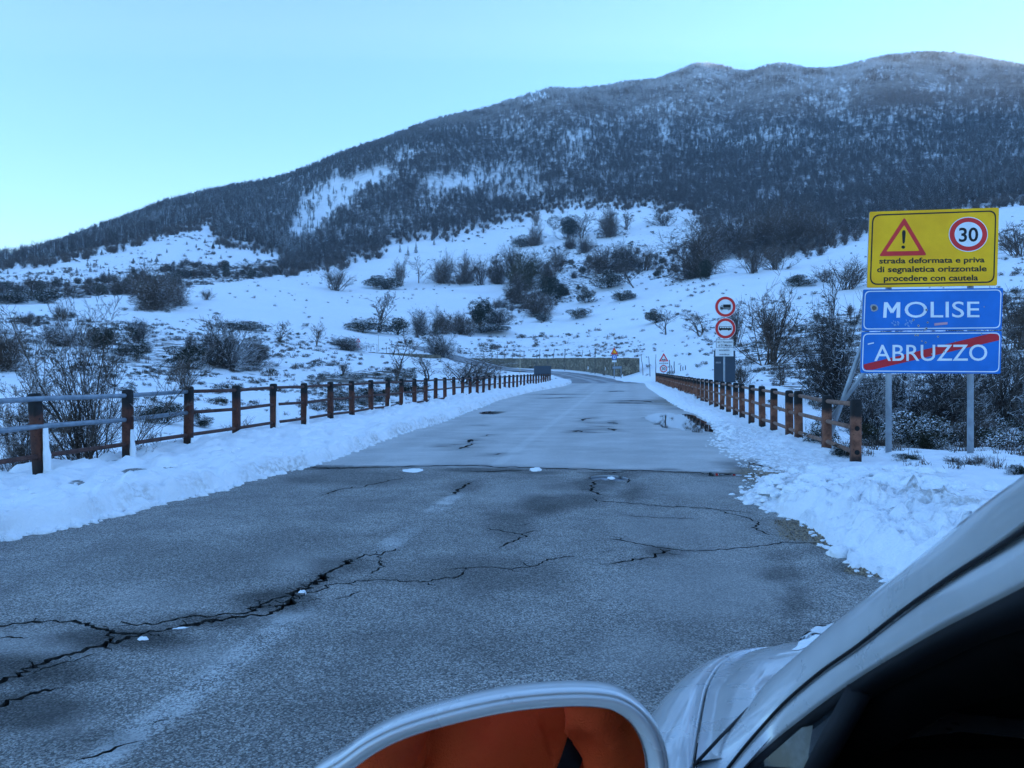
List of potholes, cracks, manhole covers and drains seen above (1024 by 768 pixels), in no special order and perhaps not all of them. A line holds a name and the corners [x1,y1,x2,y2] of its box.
crack [0,549,574,707]
crack [588,479,817,565]
crack [488,523,532,548]
